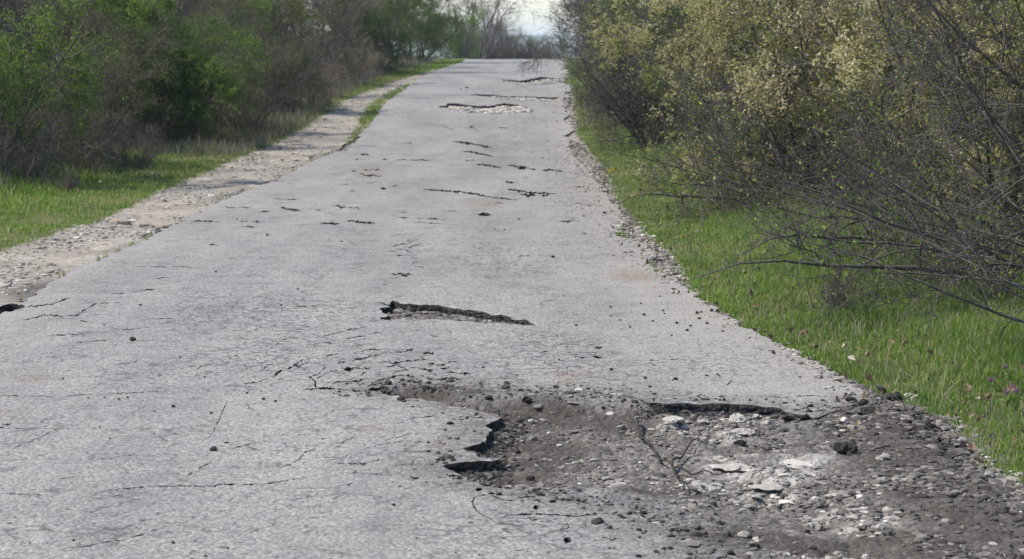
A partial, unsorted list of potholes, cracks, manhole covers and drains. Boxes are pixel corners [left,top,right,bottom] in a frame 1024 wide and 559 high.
crack [317,125,563,285]
pothole [439,103,533,114]
pothole [377,301,534,326]
crack [68,524,169,548]
crack [13,266,179,344]
crack [0,423,85,450]
crack [209,402,258,450]
pothole [368,383,1024,559]
